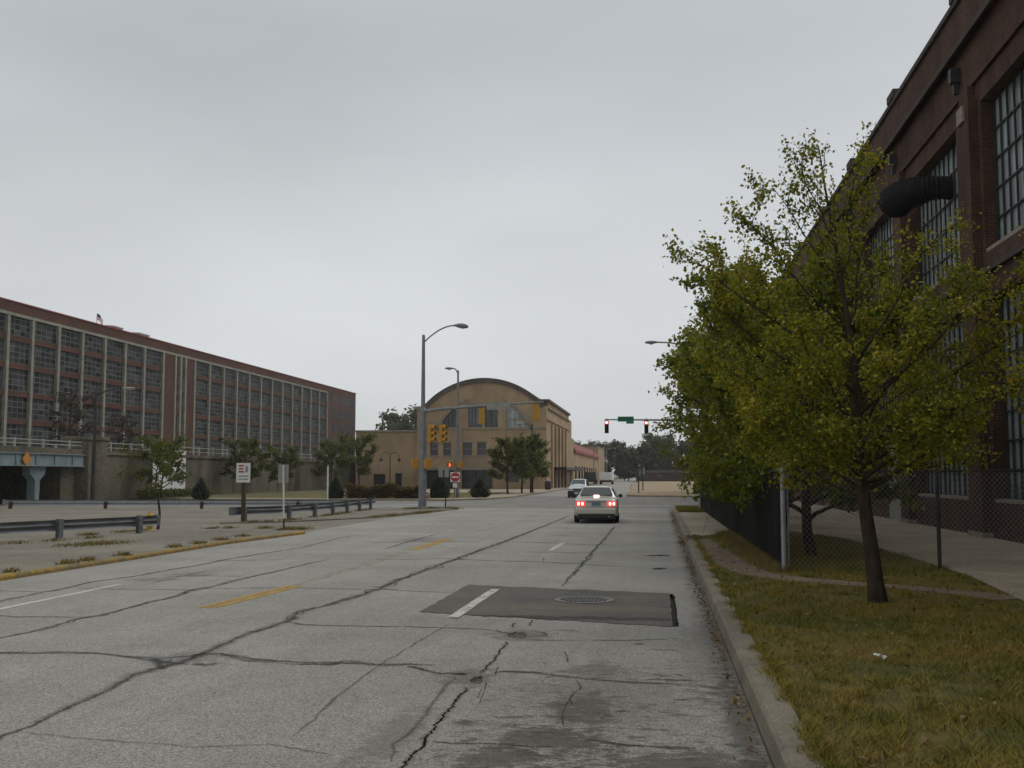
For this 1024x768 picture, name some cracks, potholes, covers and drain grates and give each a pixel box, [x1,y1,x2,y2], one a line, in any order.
crack [400,620,587,768]
